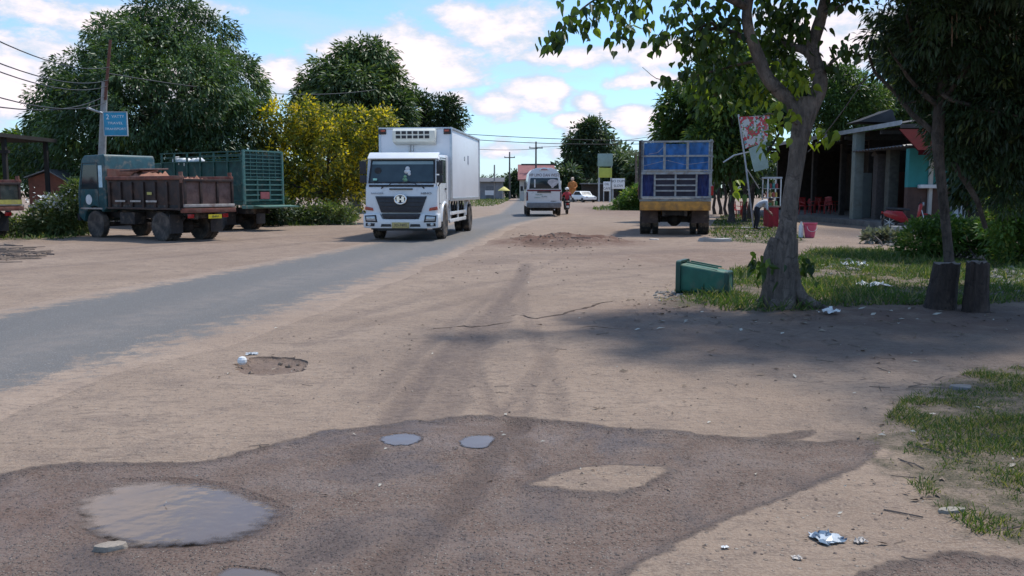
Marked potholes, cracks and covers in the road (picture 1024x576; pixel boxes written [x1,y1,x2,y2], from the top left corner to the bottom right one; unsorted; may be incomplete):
pothole [233,356,308,375]
crack [428,301,616,330]
pothole [211,565,286,576]
pothole [63,477,294,551]
pothole [376,432,424,446]
pothole [456,434,497,449]
